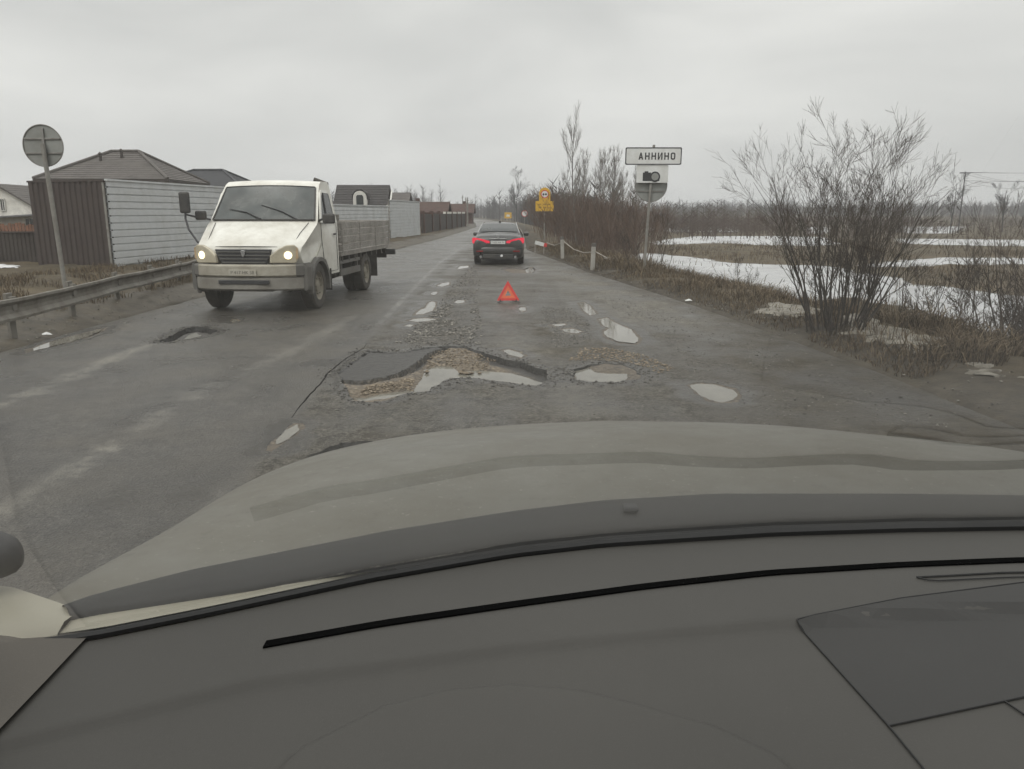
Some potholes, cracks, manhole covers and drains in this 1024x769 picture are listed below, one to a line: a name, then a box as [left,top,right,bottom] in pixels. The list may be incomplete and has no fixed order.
pothole [572,363,642,382]
pothole [686,382,742,403]
pothole [159,327,218,342]
pothole [336,346,548,402]
